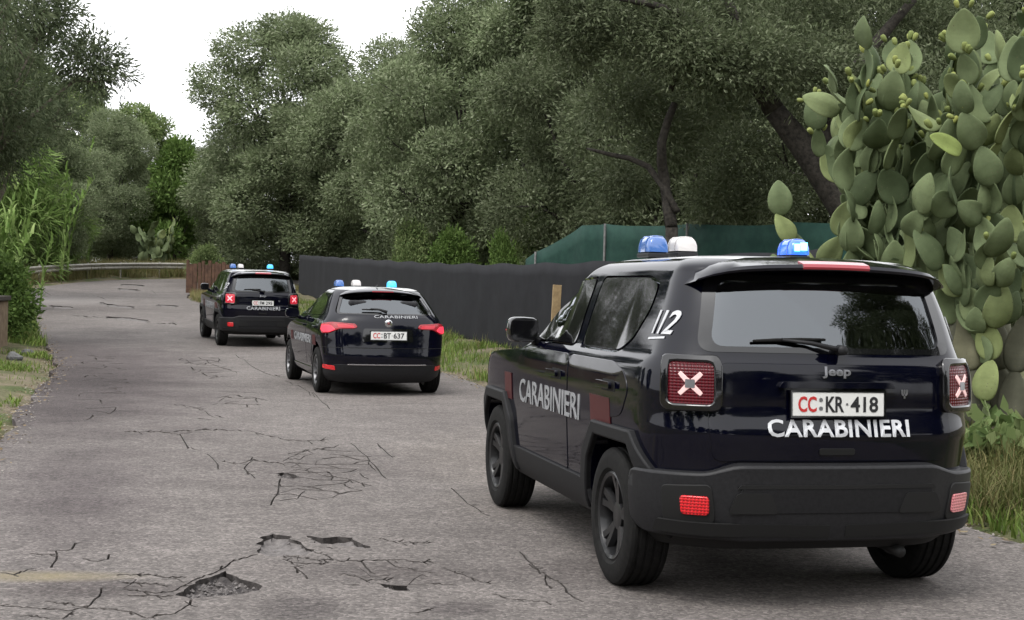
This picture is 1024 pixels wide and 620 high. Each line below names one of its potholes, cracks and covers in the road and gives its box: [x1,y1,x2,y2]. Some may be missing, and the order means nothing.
pothole [256,534,315,556]
crack [124,355,395,505]
pothole [176,571,262,599]
pothole [307,536,371,549]
crack [0,537,584,619]
